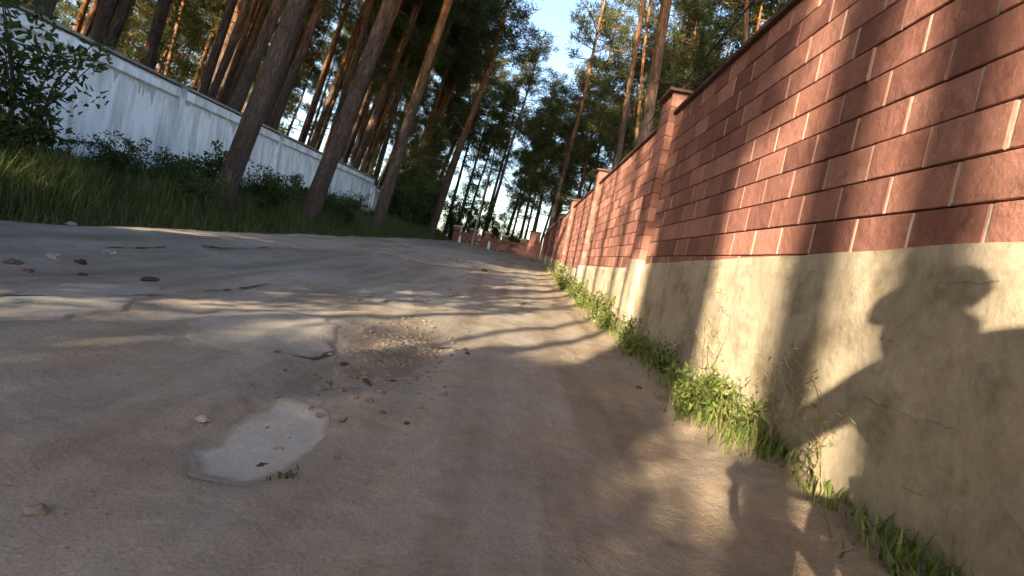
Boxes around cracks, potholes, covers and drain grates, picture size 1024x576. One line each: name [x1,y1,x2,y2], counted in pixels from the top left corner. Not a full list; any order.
crack [278,351,372,389]
pothole [332,322,451,391]
crack [186,283,270,292]
